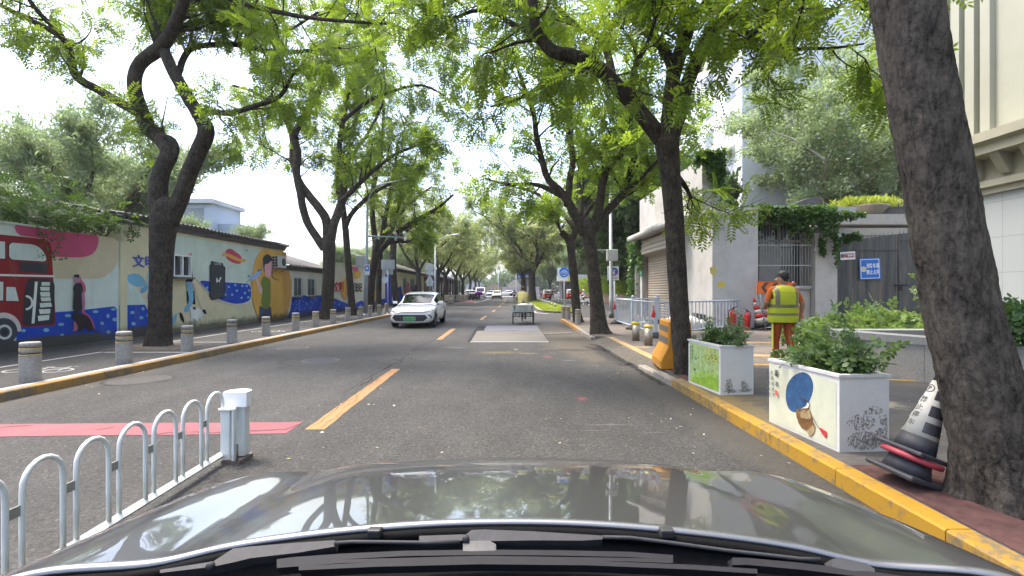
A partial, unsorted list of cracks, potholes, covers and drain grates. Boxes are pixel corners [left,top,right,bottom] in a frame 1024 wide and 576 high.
manhole cover [99,375,177,386]
manhole cover [279,356,354,366]
